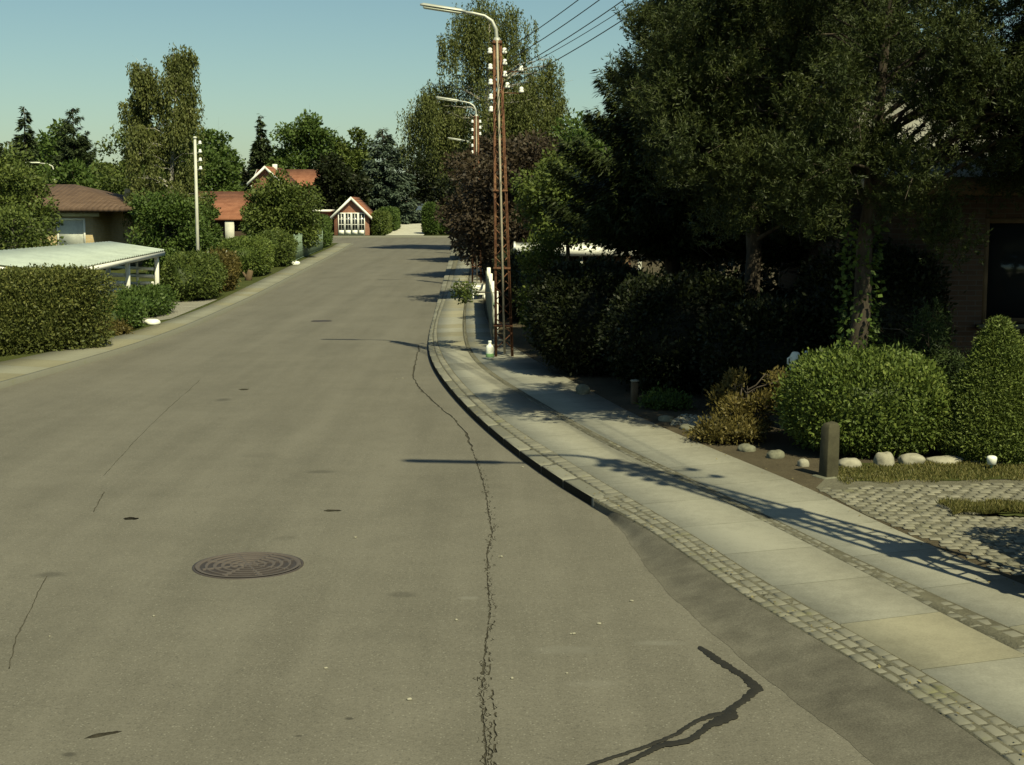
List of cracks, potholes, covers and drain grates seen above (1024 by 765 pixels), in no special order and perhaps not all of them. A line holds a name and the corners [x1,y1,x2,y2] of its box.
crack [93,381,199,512]
crack [412,345,498,765]
crack [8,576,47,669]
manhole cover [192,552,304,580]
